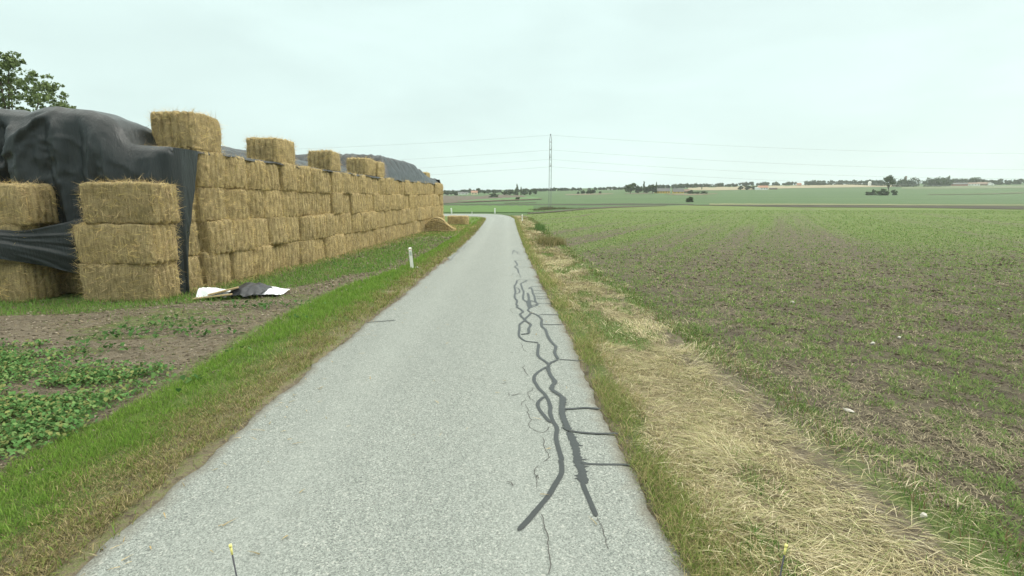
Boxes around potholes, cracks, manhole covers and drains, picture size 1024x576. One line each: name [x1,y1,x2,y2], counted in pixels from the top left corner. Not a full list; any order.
crack [502,344,550,487]
crack [541,514,551,573]
